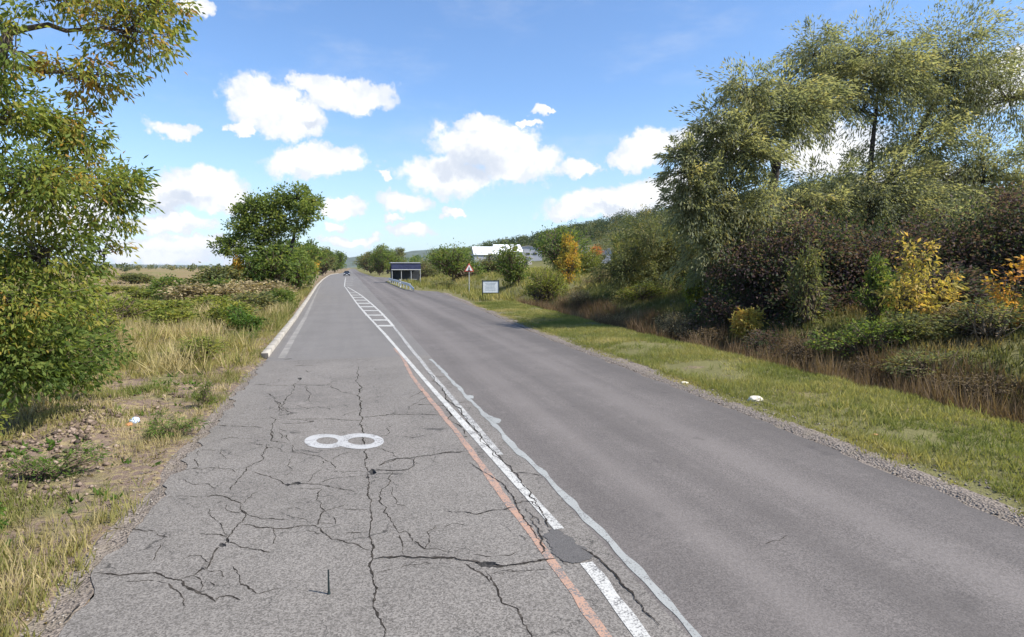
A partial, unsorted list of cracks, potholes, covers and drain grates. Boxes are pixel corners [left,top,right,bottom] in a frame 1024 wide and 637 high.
crack [94,365,660,637]
